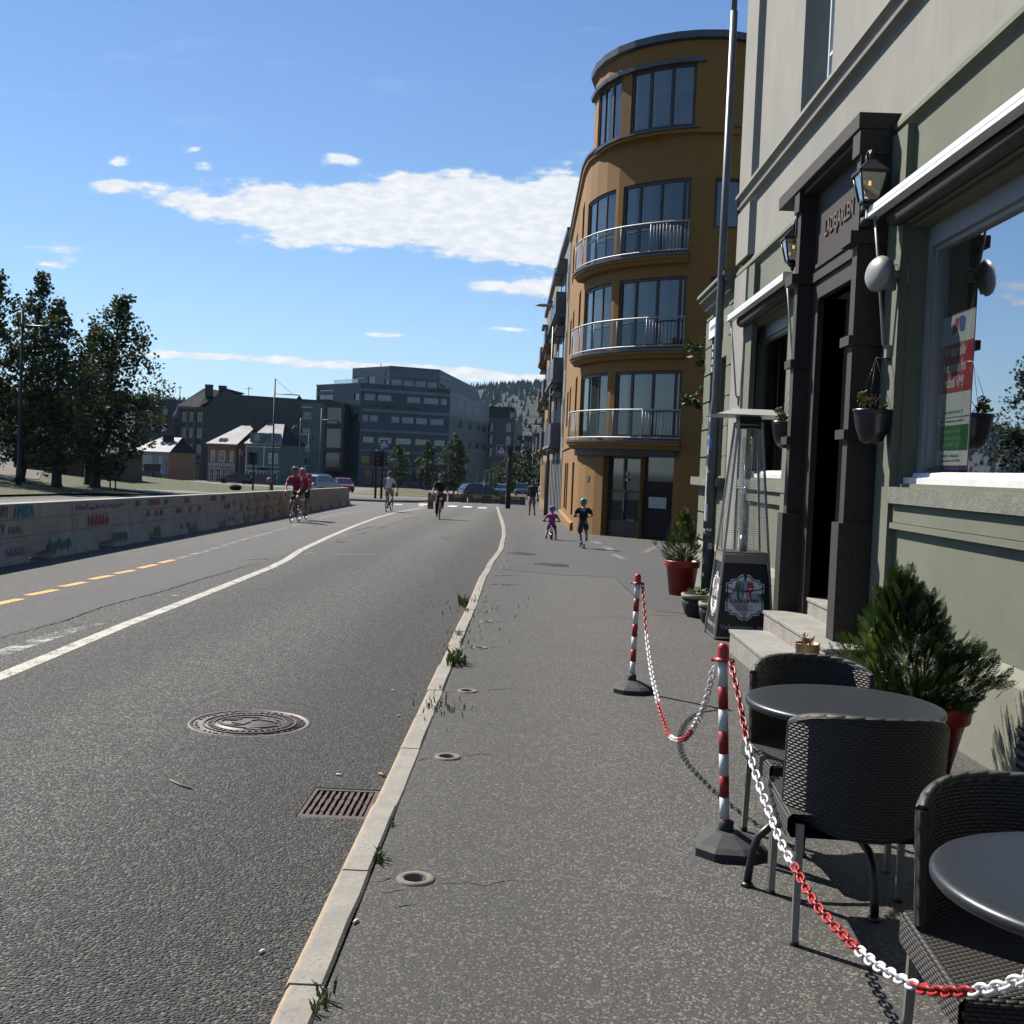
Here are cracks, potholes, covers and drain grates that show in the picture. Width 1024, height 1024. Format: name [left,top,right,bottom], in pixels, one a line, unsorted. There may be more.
drain grate [297,788,380,819]
manhole cover [187,710,311,737]
crack [374,877,523,908]
